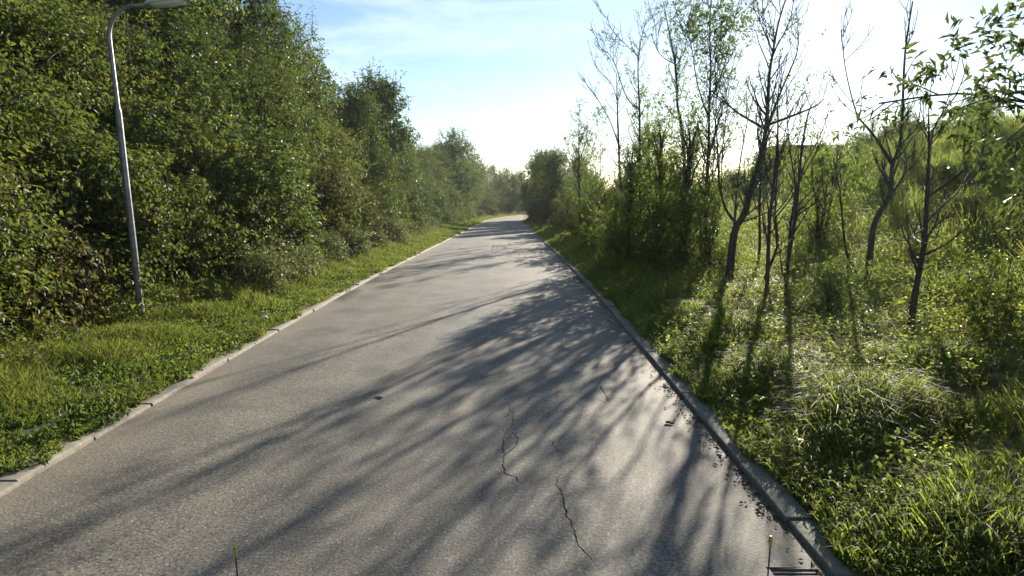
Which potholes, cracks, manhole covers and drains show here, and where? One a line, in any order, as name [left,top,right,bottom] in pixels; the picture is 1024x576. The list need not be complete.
drain grate [766,568,827,576]
crack [555,473,592,560]
crack [502,406,521,483]
